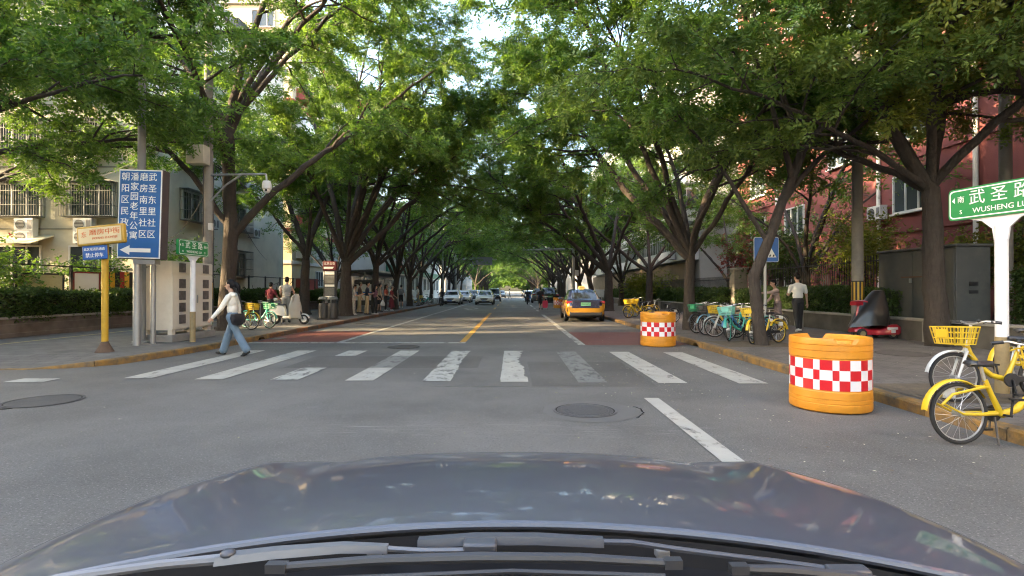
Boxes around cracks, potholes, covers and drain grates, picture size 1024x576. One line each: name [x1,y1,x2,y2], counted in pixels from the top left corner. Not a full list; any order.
manhole cover [0,394,86,408]
manhole cover [553,403,617,418]
